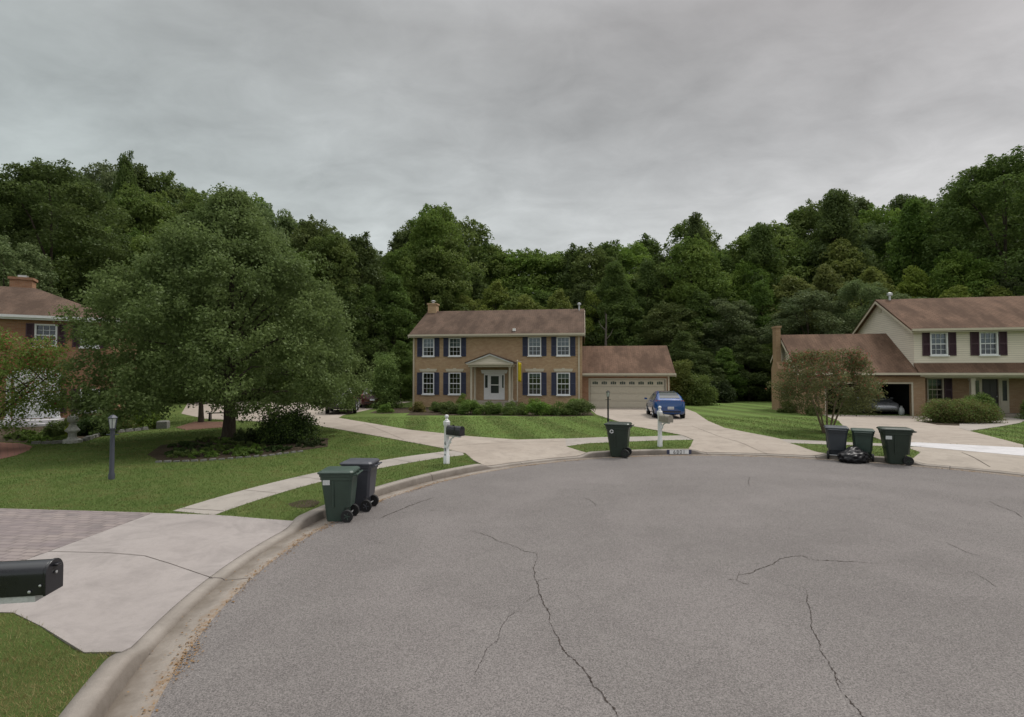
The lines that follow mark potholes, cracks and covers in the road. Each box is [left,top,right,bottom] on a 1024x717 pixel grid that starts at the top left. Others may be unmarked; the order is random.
crack [729,555,867,584]
crack [802,587,864,717]
crack [470,530,618,716]
